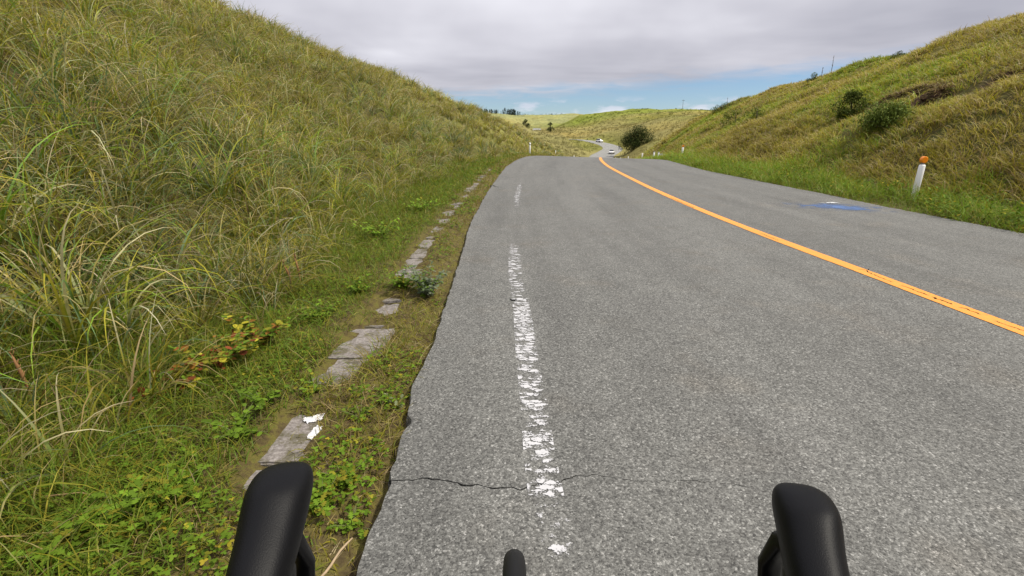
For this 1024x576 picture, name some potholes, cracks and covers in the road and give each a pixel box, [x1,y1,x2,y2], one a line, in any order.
crack [389,474,746,491]
